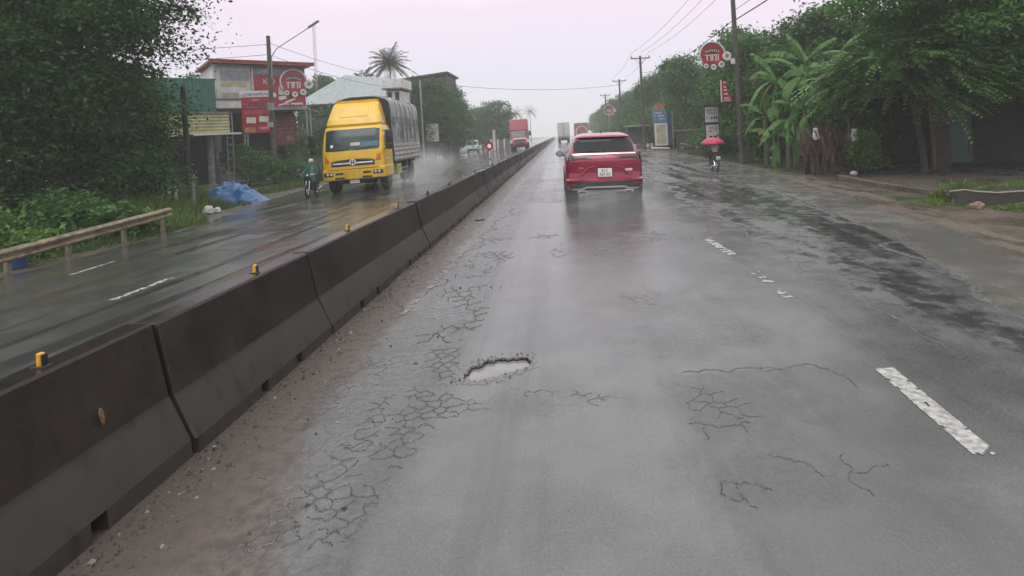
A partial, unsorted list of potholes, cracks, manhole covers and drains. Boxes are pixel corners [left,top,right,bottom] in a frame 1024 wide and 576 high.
crack [684,363,858,439]
pothole [450,352,538,386]
crack [768,452,890,496]
crack [225,208,609,553]
crack [720,480,773,508]
